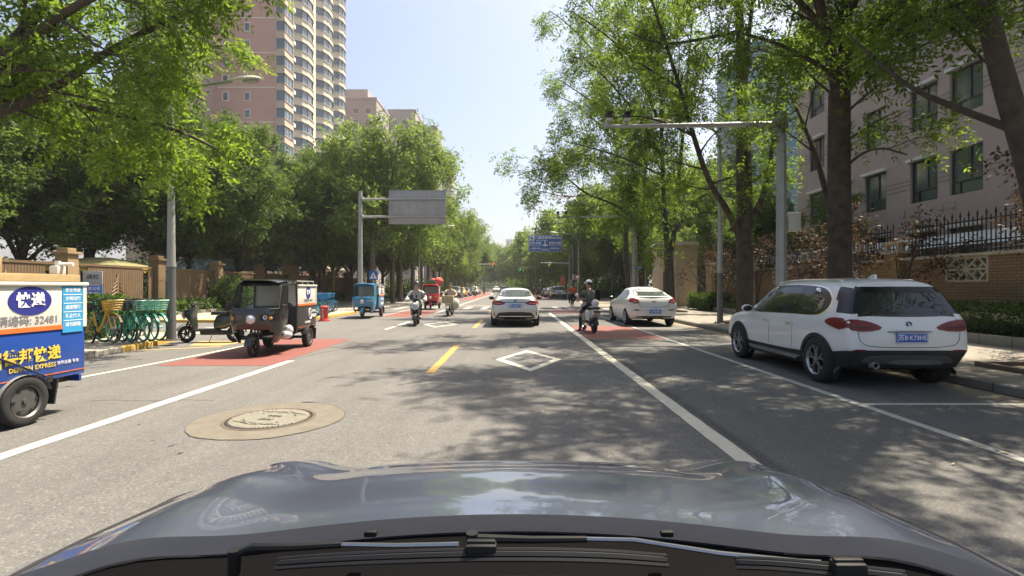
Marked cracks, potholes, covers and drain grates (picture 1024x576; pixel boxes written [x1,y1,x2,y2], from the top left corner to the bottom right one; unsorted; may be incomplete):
manhole cover [185,402,346,440]
